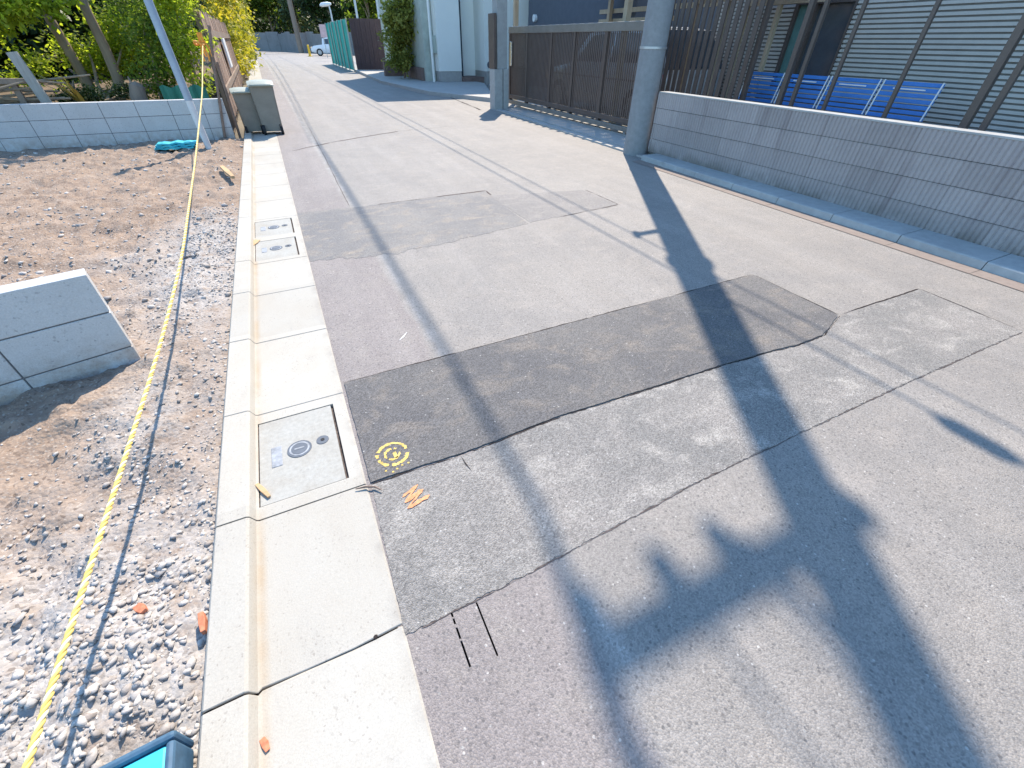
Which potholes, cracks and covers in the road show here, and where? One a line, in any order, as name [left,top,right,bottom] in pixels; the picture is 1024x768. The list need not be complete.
manhole cover [259,406,346,507]
manhole cover [256,237,298,261]
manhole cover [255,218,293,238]
